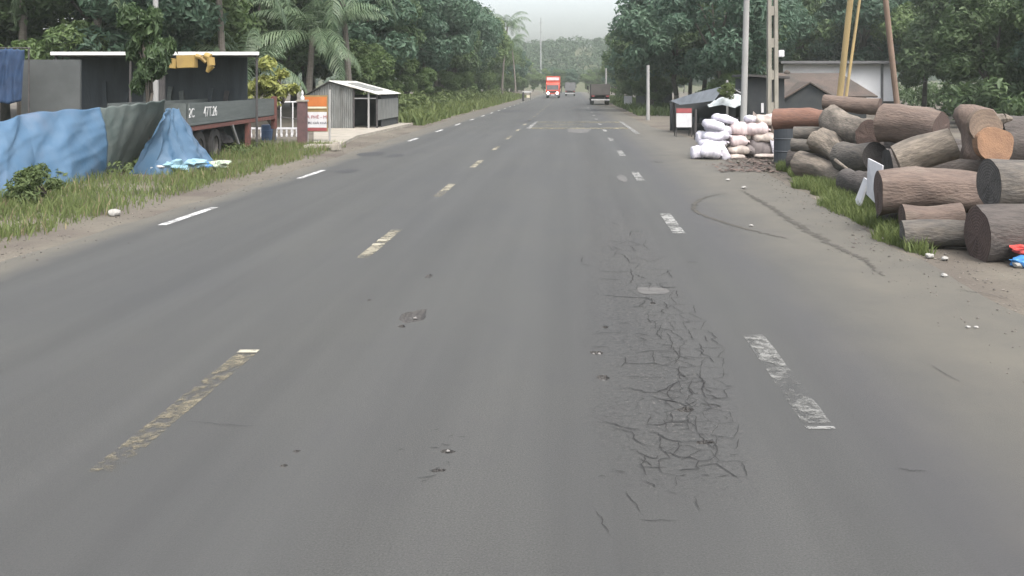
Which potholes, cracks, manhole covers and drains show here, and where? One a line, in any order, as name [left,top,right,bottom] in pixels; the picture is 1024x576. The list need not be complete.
crack [595,222,747,521]
pothole [399,309,427,323]
